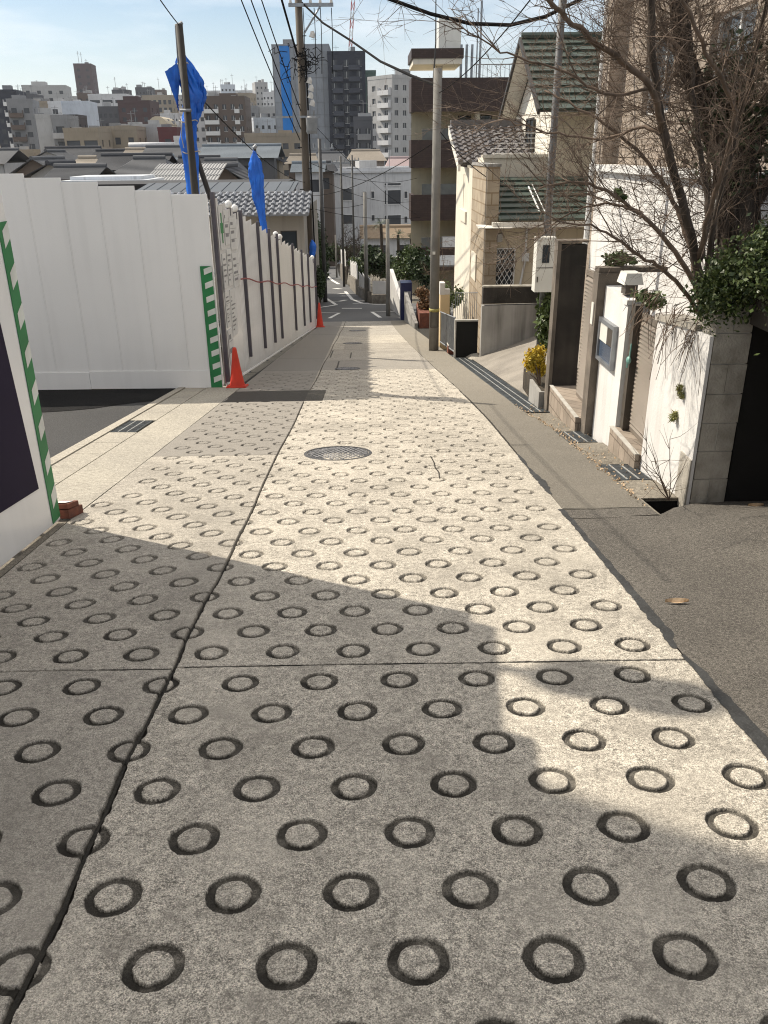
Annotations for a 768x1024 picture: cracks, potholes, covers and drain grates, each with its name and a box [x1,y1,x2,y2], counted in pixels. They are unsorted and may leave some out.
drain grate [598,464,652,481]
drain grate [451,355,550,413]
drain grate [110,420,153,433]
drain grate [556,431,598,443]
manhole cover [304,446,372,461]
